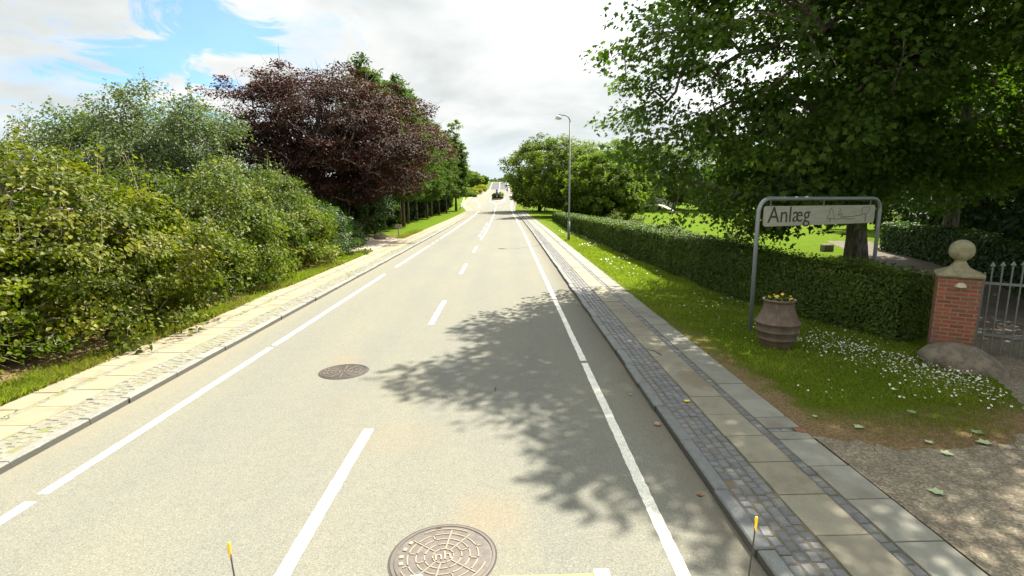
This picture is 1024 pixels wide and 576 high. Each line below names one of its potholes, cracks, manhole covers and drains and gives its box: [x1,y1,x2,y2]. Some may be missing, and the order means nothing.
manhole cover [387,524,497,576]
manhole cover [318,364,369,380]
